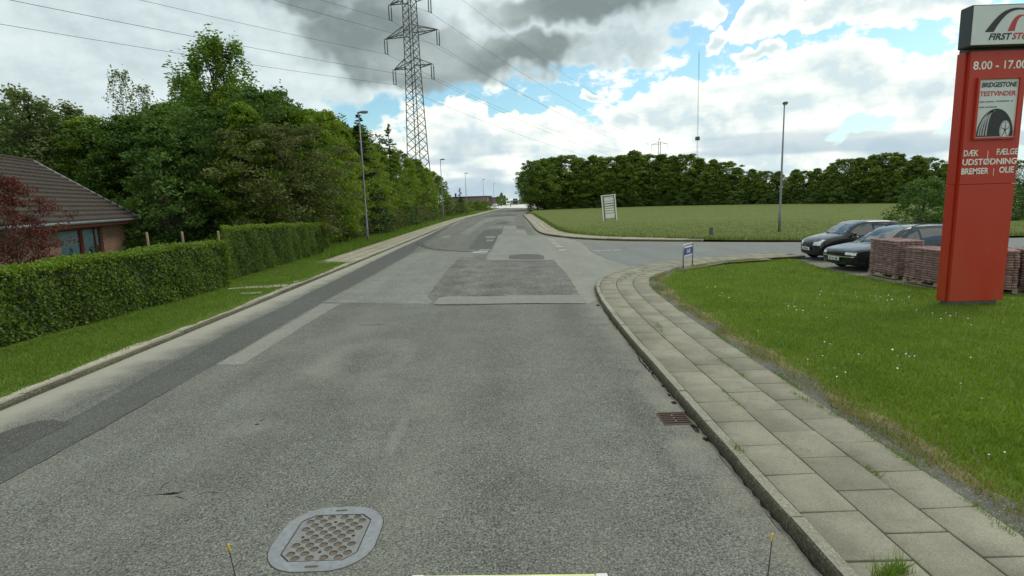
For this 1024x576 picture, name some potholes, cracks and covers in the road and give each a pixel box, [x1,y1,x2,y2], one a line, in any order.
manhole cover [267,507,384,573]
drain grate [656,412,694,427]
crack [147,482,215,499]
